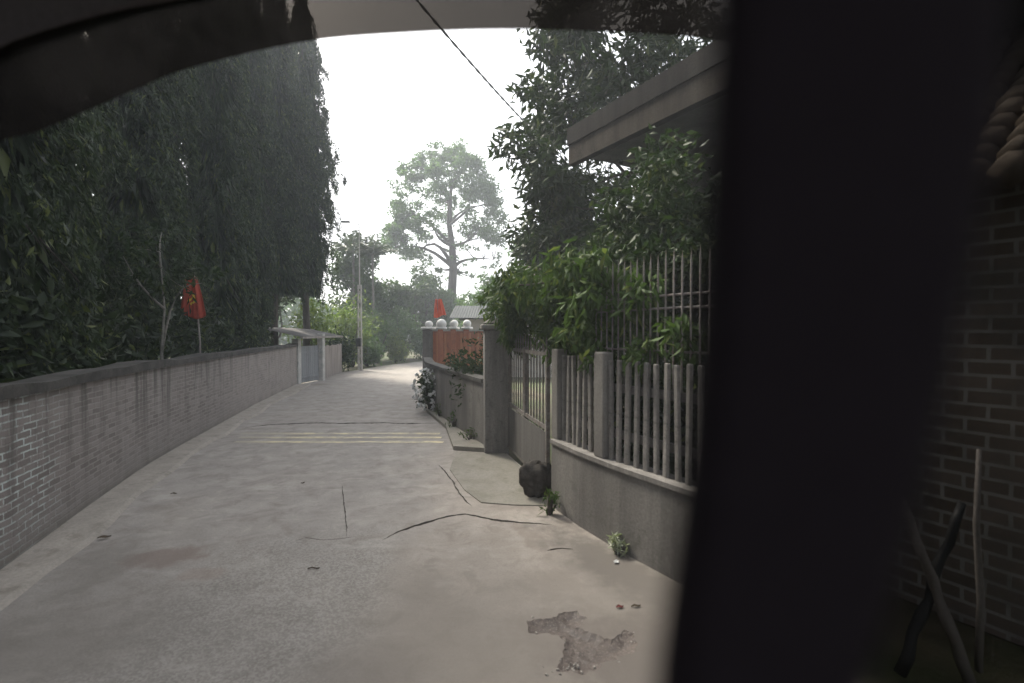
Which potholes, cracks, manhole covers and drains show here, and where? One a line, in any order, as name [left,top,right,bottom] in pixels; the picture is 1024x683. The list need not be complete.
crack [382,467,550,540]
pothole [527,611,637,676]
crack [297,487,354,541]
